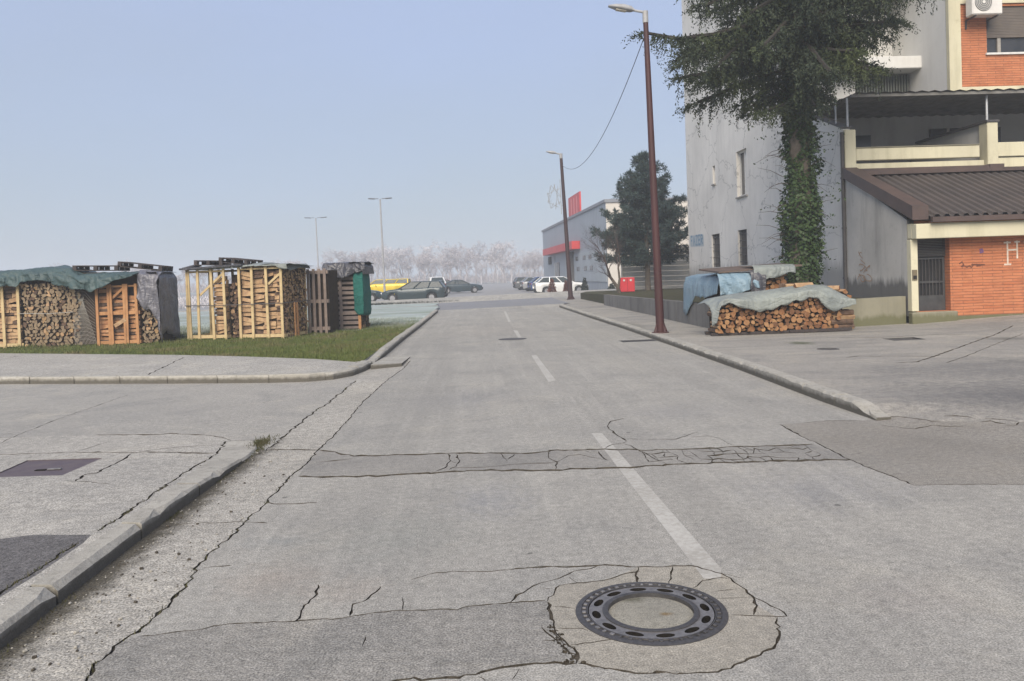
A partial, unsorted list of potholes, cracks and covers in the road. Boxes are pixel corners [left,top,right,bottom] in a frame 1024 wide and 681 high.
manhole cover [0,458,101,477]
manhole cover [575,582,729,646]
crack [143,564,787,681]
crack [0,433,229,484]
